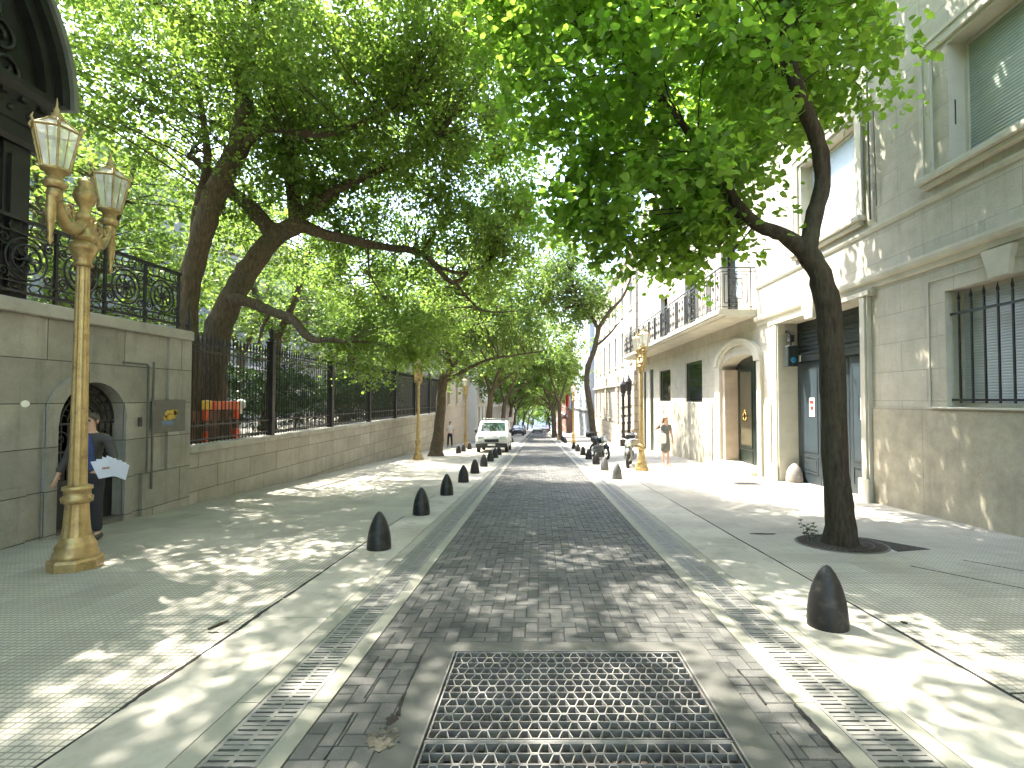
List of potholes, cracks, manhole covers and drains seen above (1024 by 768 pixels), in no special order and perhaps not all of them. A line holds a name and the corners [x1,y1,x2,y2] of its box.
drain grate [428,522,458,536]
drain grate [197,667,339,768]
drain grate [442,512,466,522]
drain grate [411,536,447,553]
drain grate [387,553,433,577]
drain grate [410,650,753,768]
drain grate [297,612,384,667]
drain grate [352,577,413,612]
drain grate [452,503,473,512]
